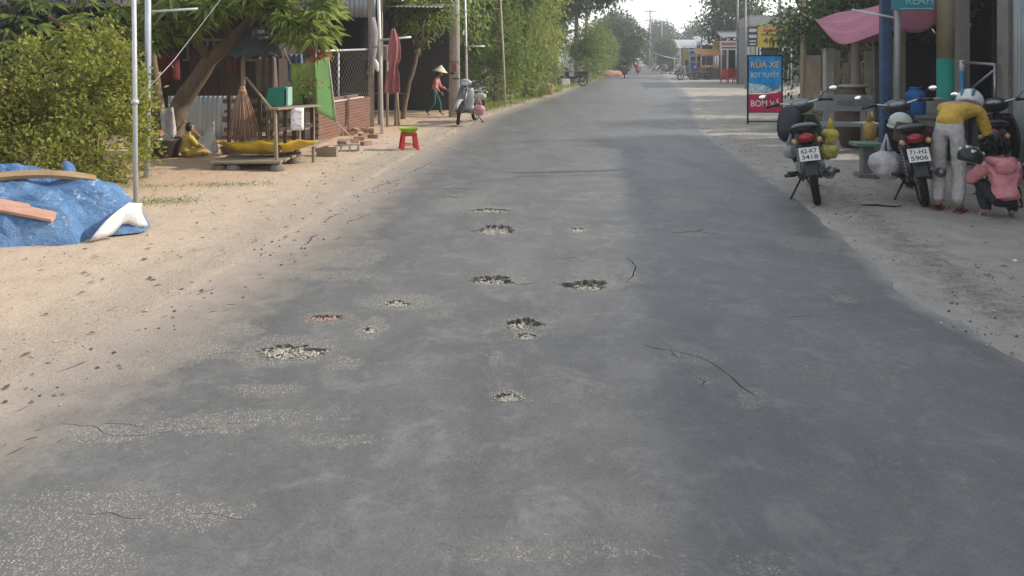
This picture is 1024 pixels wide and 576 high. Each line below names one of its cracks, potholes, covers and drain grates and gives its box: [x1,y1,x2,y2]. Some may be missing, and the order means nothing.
pothole [488,391,531,403]
pothole [449,273,523,288]
crack [74,512,247,560]
pothole [542,278,619,294]
pothole [242,338,345,365]
pothole [459,221,529,239]
crack [642,344,758,398]
pothole [298,313,353,324]
pothole [490,314,557,334]
crack [3,360,246,456]
pothole [510,330,540,342]
pothole [375,298,417,308]
